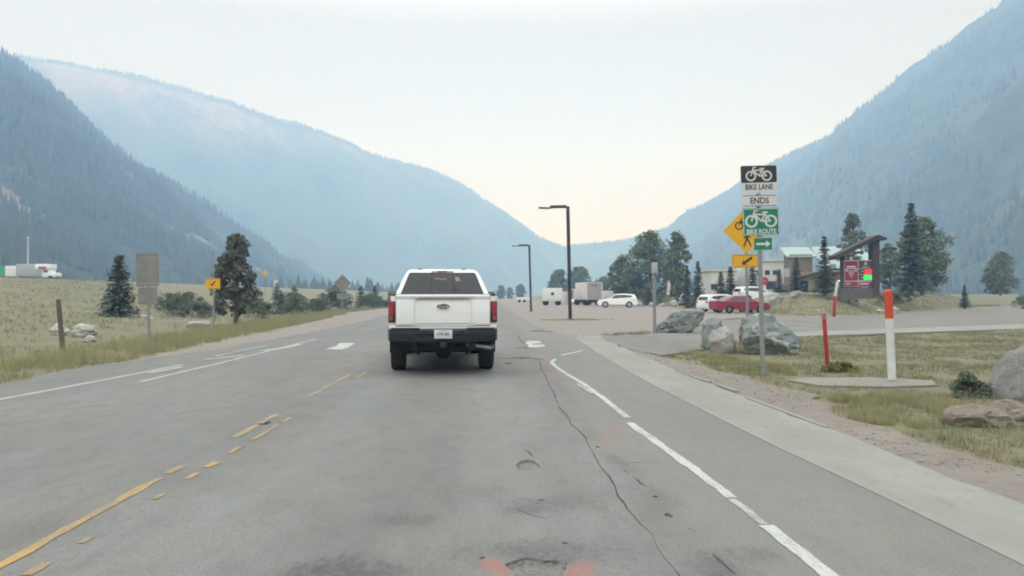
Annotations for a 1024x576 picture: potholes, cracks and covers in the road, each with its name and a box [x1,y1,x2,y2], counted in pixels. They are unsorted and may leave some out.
pothole [516,460,540,471]
crack [500,330,552,360]
pothole [505,558,568,576]
